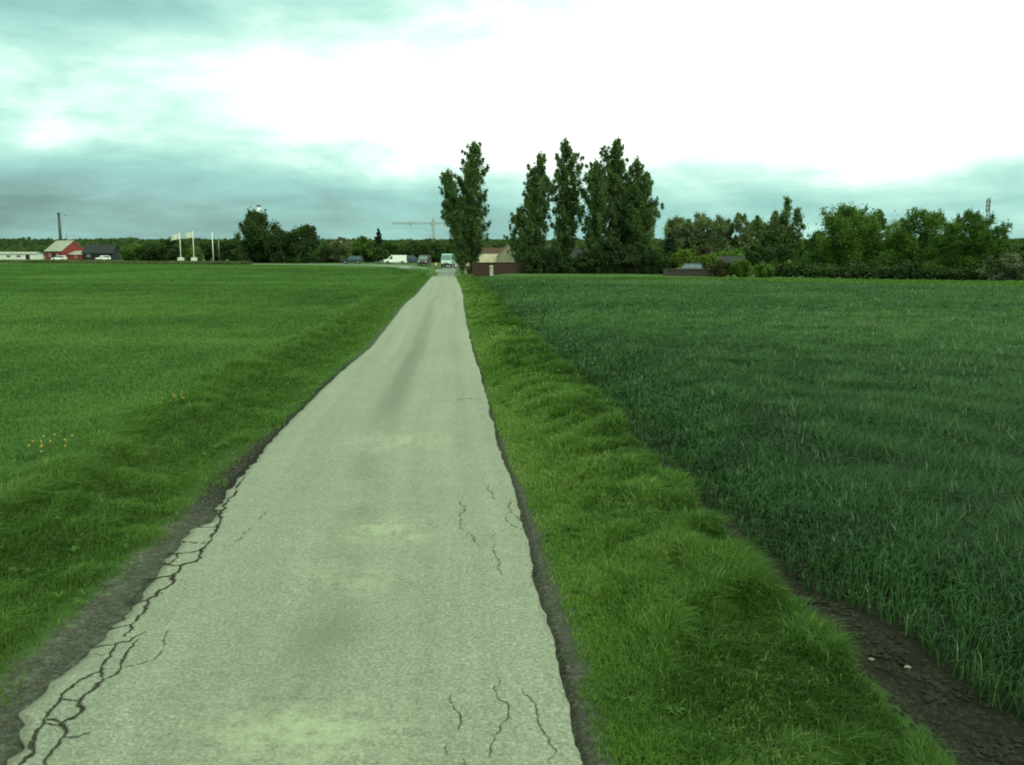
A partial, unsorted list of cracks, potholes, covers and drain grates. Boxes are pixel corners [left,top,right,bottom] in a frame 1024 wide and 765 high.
crack [459,490,523,574]
crack [18,476,266,765]
crack [489,677,557,762]
